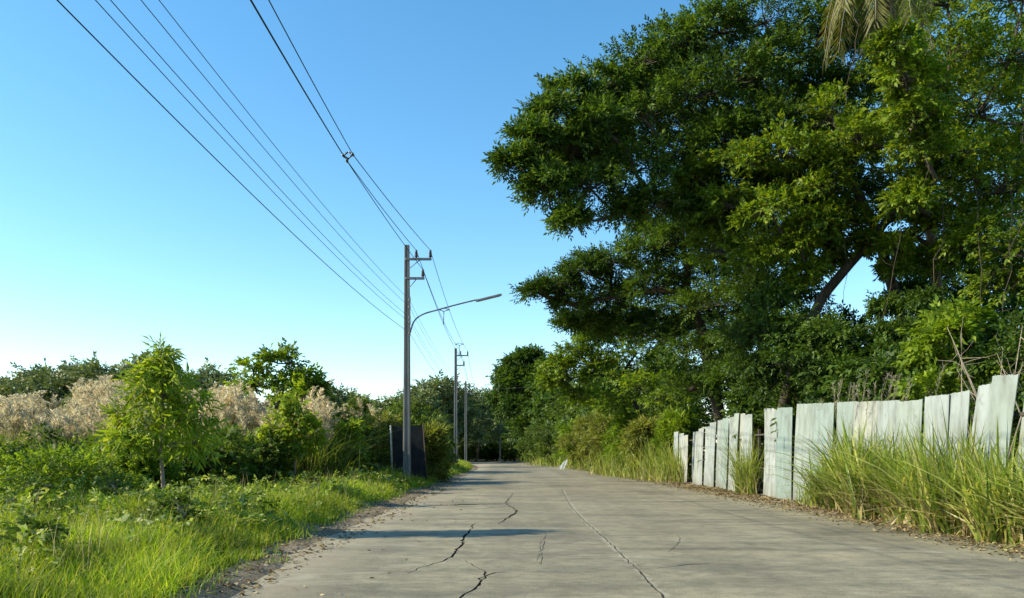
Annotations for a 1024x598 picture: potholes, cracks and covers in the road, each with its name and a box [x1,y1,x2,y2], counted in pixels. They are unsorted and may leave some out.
crack [455,494,518,524]
crack [561,489,736,598]
crack [408,523,498,598]
crack [537,533,547,565]
